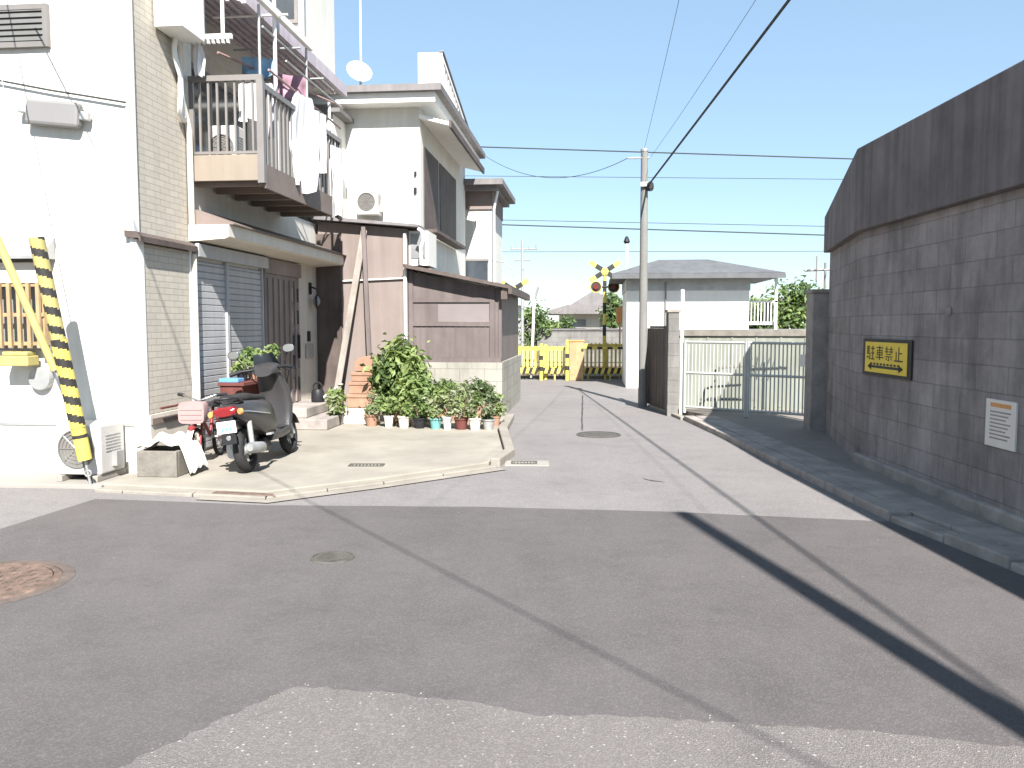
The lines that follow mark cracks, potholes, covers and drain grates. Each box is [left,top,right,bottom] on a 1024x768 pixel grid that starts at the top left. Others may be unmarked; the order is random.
manhole cover [310,551,355,564]
manhole cover [0,560,76,604]
